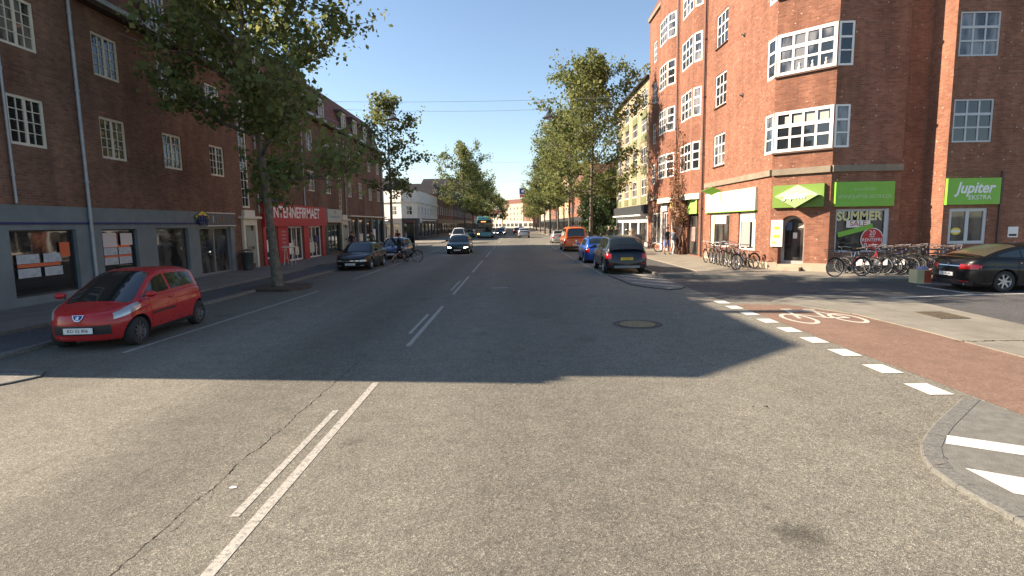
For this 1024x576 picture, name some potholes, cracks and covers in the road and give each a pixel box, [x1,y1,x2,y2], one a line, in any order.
manhole cover [612,320,663,329]
